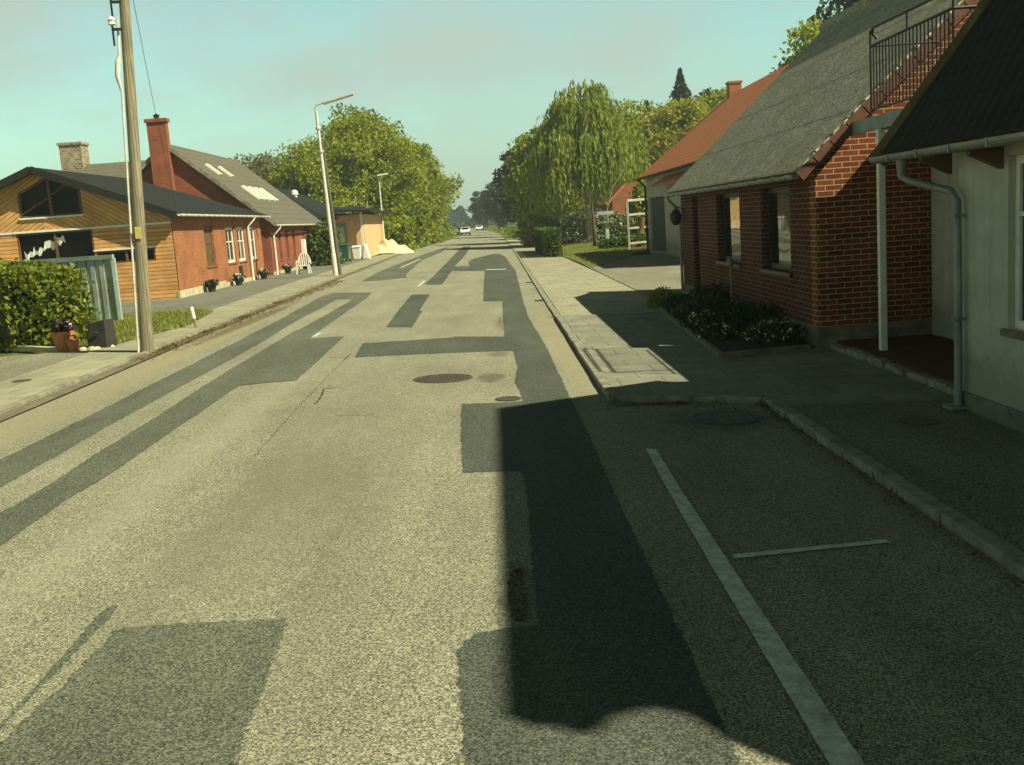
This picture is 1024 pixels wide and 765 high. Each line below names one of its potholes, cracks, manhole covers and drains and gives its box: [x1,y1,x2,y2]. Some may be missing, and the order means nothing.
manhole cover [897,417,940,425]
crack [255,354,373,455]
manhole cover [413,374,473,383]
manhole cover [690,411,764,425]
